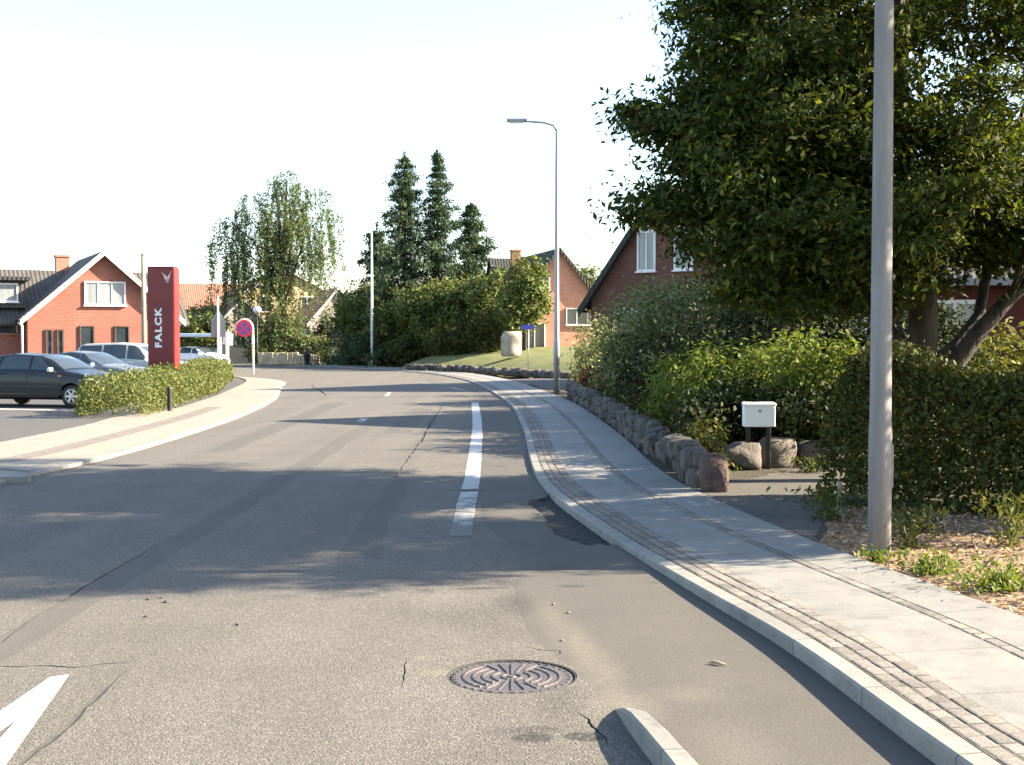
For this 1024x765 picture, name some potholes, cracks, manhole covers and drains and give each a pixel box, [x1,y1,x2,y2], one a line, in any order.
crack [576,711,608,745]
manhole cover [447,659,577,694]
crack [370,403,514,478]
